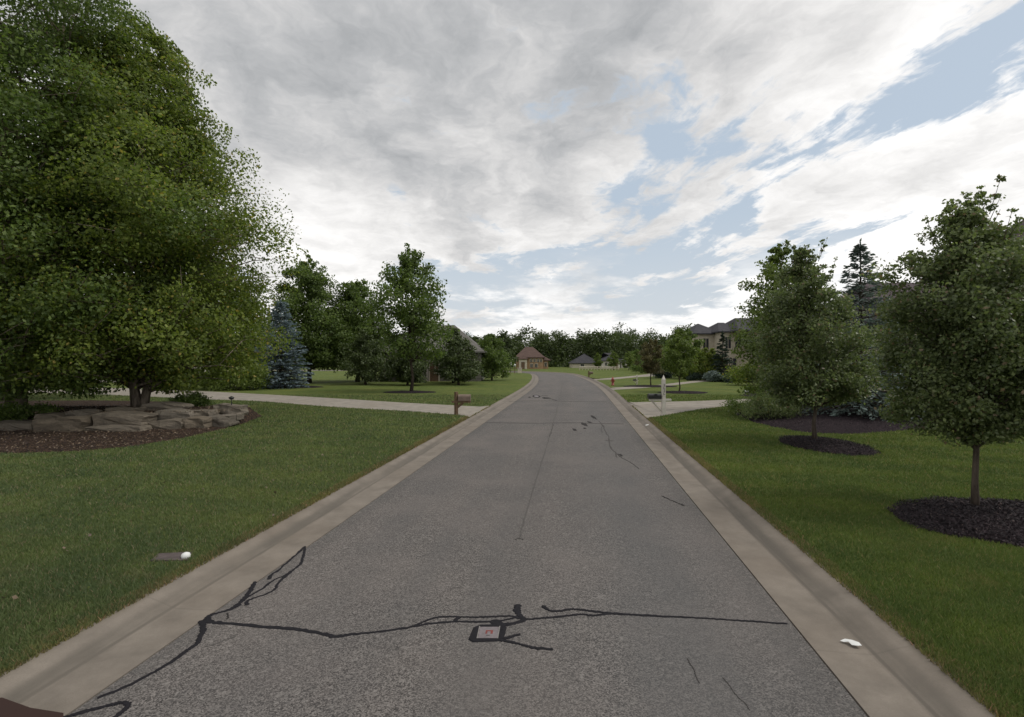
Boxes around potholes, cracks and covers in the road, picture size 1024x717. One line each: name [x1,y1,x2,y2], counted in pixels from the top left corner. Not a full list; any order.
crack [599,421,639,469]
utility cover [468,624,507,642]
